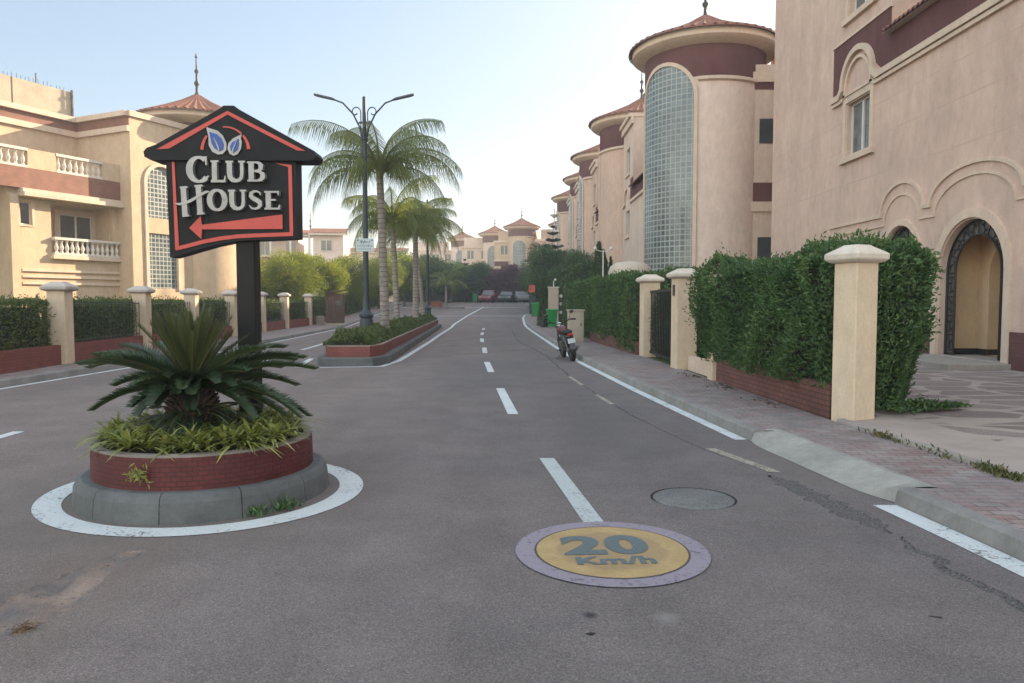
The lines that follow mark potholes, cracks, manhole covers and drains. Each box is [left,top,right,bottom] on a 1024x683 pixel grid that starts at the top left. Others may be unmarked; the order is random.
manhole cover [650,487,737,510]
crack [769,476,1024,612]
